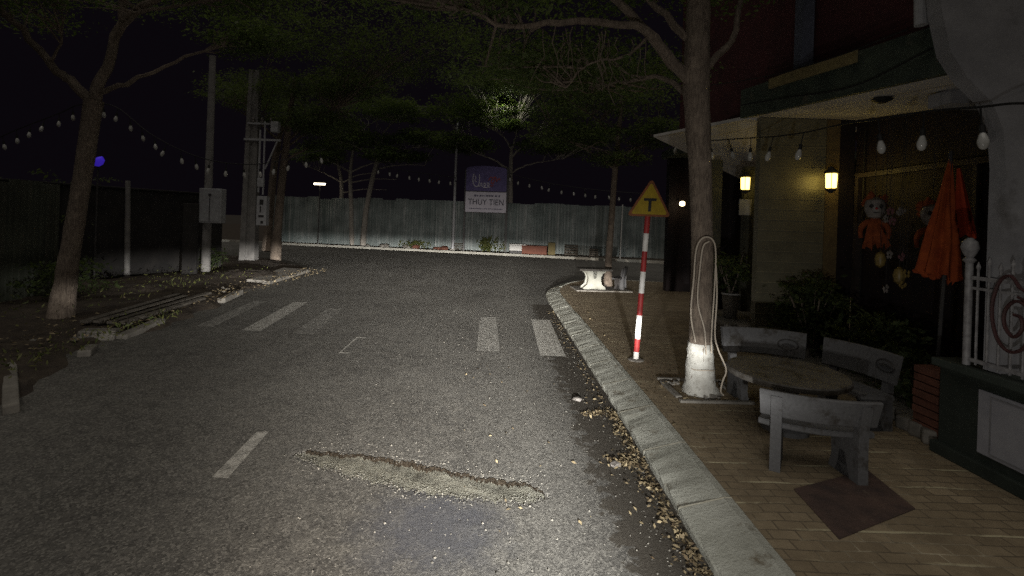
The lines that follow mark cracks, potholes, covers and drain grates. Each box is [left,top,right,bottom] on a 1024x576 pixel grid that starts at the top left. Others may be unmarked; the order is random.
pothole [294,450,547,509]
